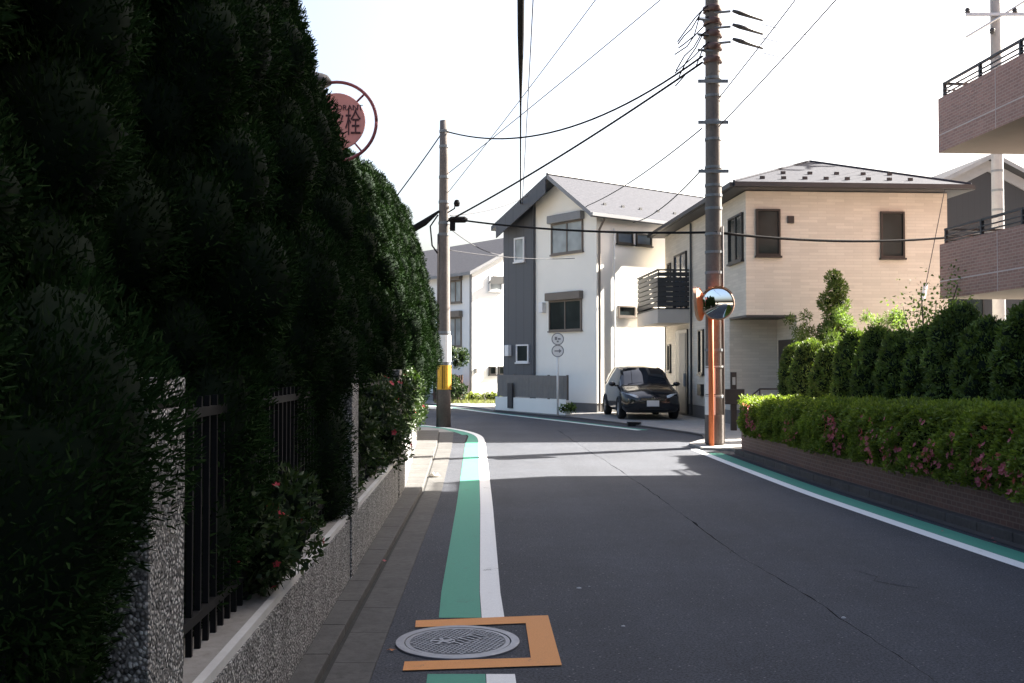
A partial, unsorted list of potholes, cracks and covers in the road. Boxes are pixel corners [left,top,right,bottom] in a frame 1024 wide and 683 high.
manhole cover [396,625,520,660]
